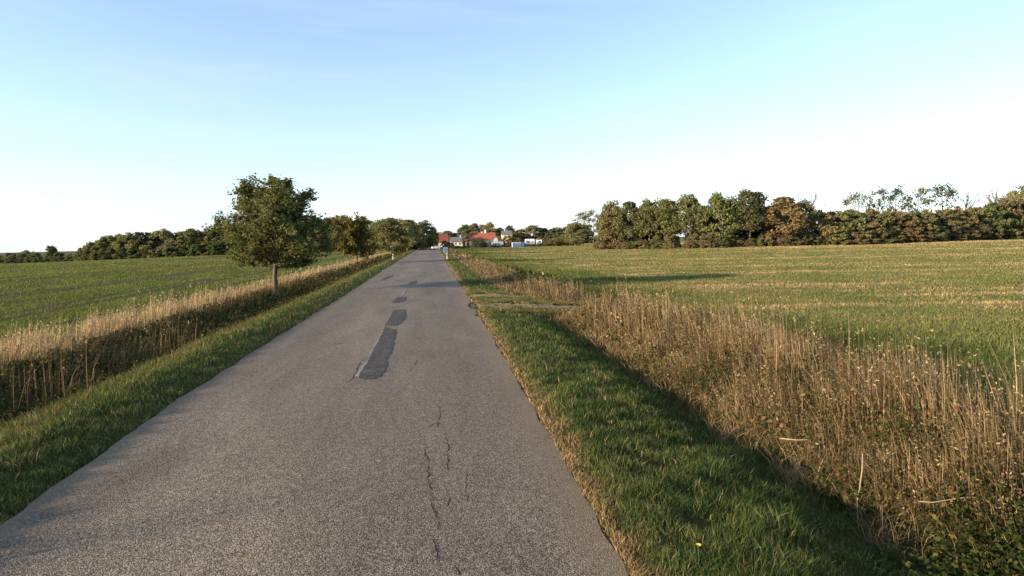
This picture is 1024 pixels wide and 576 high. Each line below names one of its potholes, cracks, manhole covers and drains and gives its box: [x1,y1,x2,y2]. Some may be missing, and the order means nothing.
crack [425,406,469,576]
